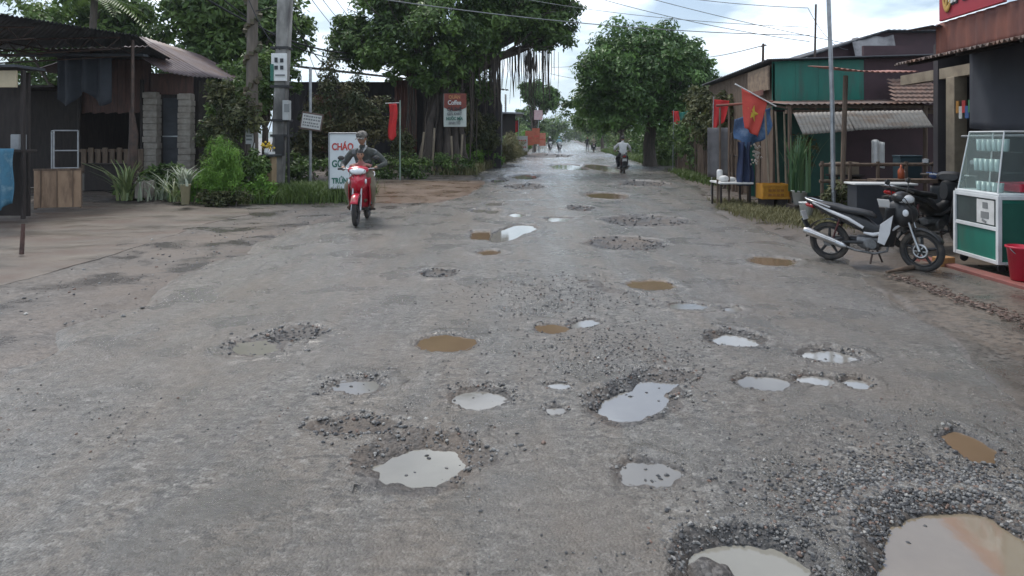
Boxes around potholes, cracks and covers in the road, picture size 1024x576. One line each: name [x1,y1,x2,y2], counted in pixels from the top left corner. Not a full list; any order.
pothole [206,330,309,362]
pothole [611,276,692,294]
pothole [519,317,585,338]
pothole [830,369,890,392]
pothole [426,375,534,413]
pothole [718,366,815,395]
pothole [586,442,708,499]
pothole [257,318,347,342]
pothole [399,328,495,356]
pothole [407,266,471,279]
pothole [828,480,1024,576]
